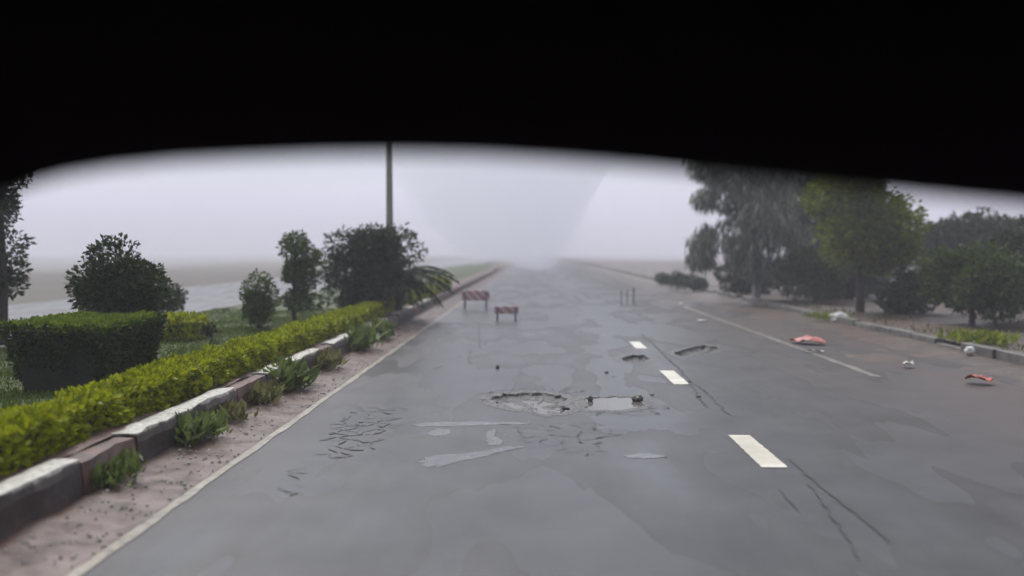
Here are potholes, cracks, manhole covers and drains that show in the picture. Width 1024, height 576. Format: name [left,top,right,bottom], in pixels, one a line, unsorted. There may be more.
crack [278,407,405,495]
crack [483,387,670,455]
crack [641,333,731,415]
pothole [667,344,727,357]
pothole [612,354,660,364]
crack [779,457,889,559]
pothole [559,394,659,413]
pothole [478,390,589,417]
